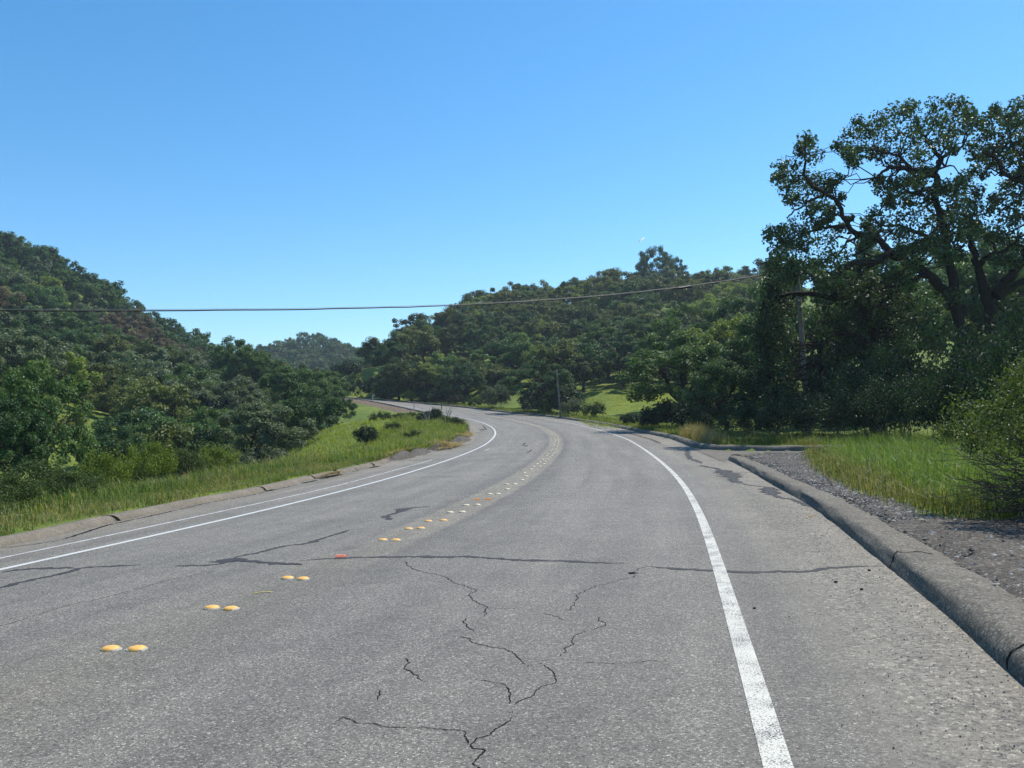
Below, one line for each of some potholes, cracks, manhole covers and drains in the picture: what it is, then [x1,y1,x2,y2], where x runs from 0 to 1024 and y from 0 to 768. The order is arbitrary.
crack [406,562,529,666]
crack [338,613,606,768]
